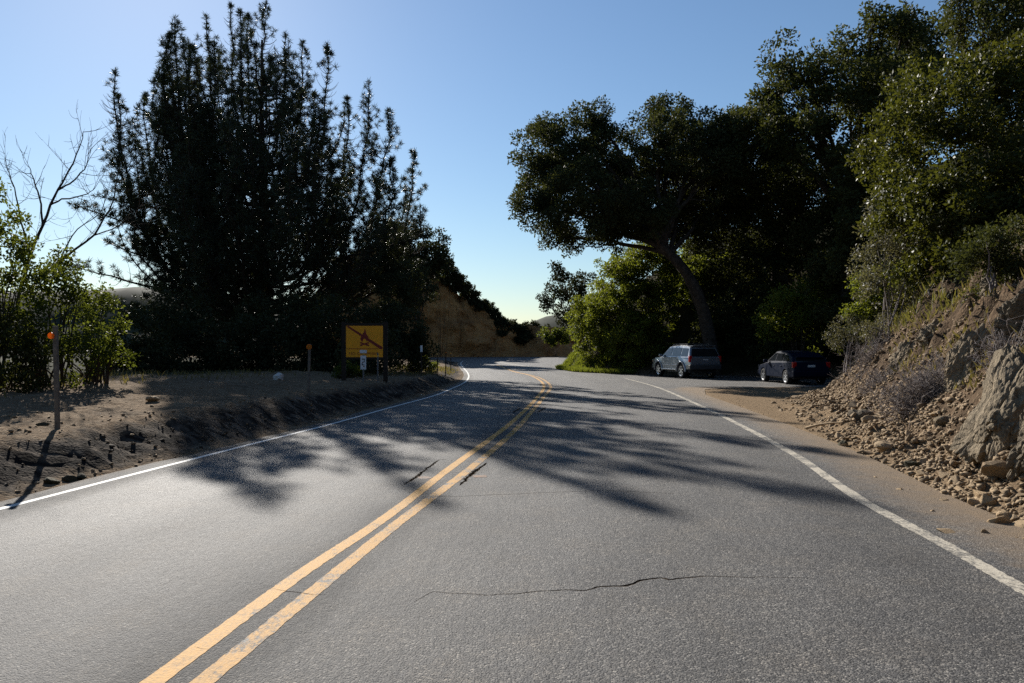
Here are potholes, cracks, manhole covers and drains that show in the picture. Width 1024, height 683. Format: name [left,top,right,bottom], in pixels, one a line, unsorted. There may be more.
crack [416,576,794,601]
crack [405,459,672,497]
